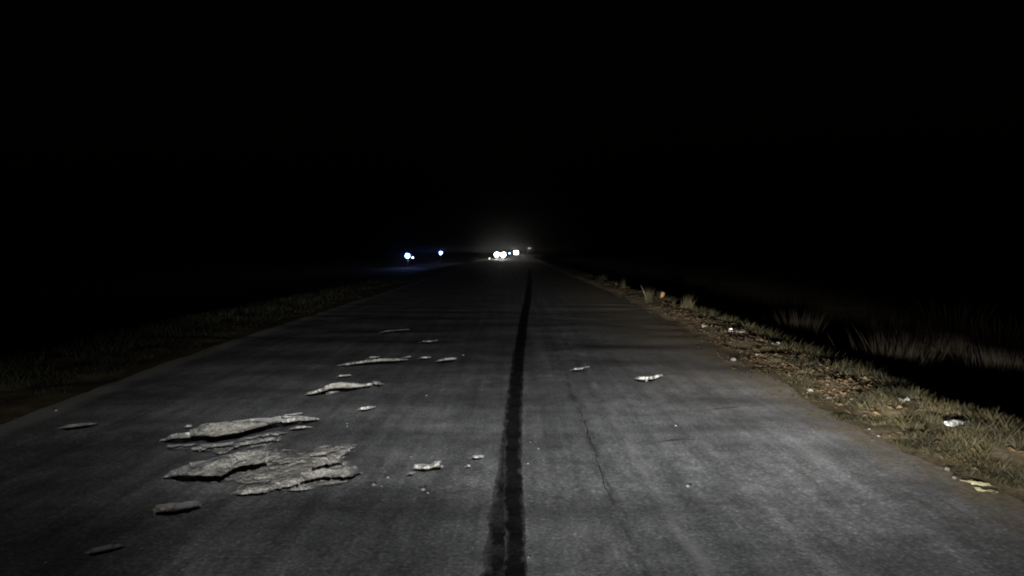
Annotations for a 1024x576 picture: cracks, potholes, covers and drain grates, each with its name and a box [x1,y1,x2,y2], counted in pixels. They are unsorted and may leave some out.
pothole [281,412,303,425]
